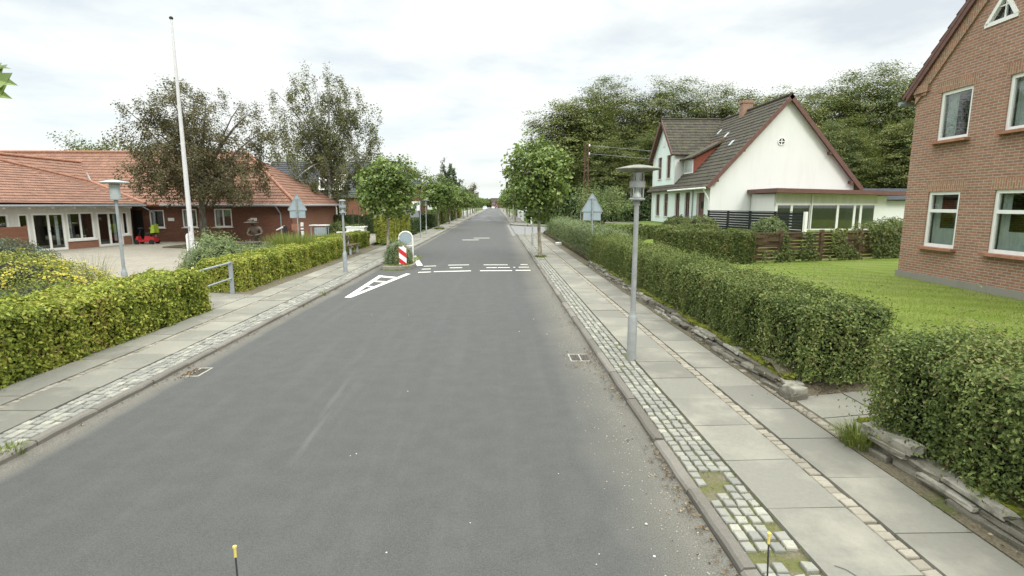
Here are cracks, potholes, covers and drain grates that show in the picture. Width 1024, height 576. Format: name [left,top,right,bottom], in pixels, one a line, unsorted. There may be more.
drain grate [182,368,213,377]
drain grate [567,354,590,362]
